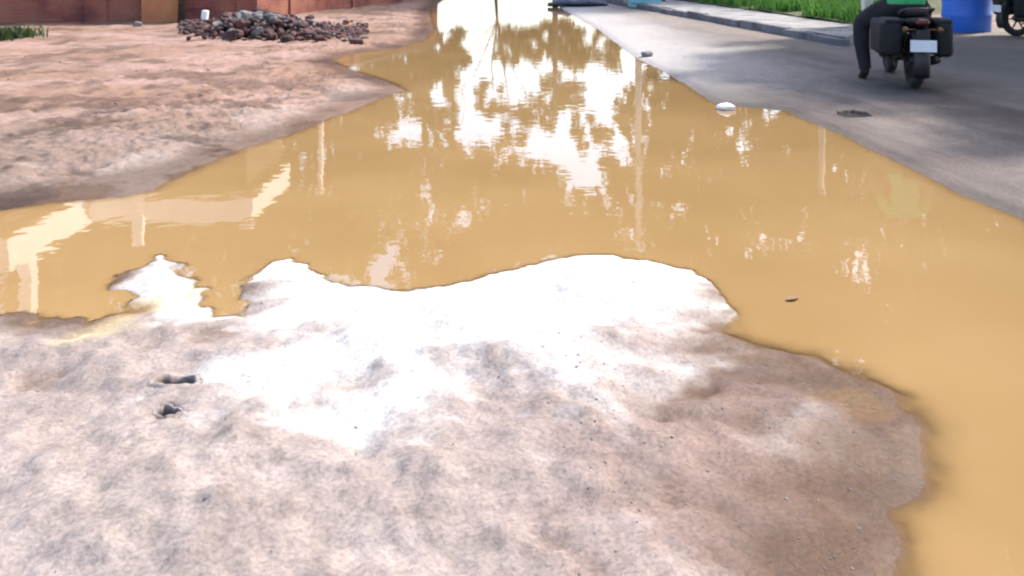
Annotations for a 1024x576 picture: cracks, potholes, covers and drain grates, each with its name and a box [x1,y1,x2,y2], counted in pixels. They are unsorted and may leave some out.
pothole [830,109,877,119]
pothole [151,402,187,419]
pothole [147,372,201,388]
